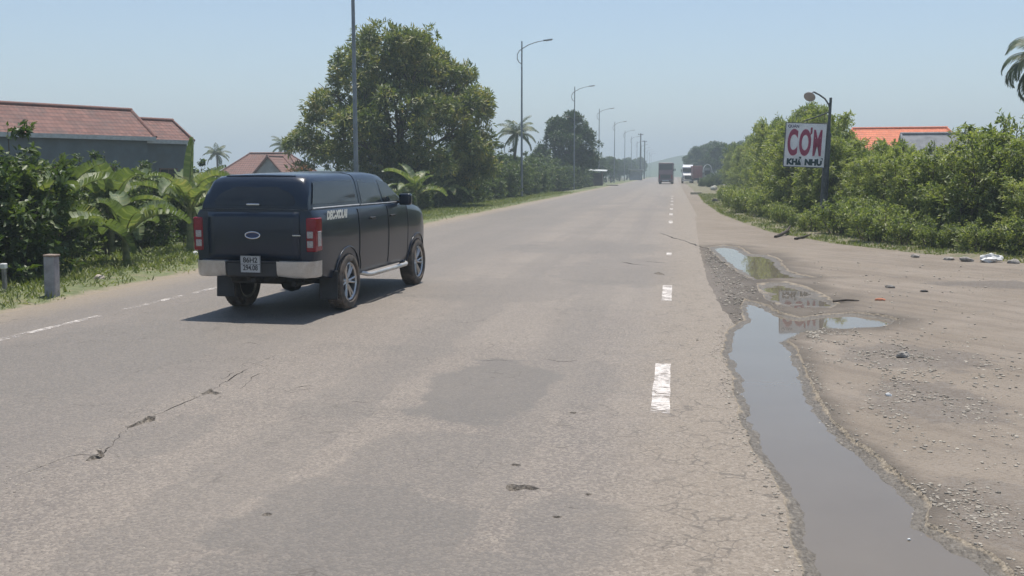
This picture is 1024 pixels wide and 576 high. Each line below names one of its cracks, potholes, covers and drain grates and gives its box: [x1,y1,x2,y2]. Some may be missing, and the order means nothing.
pothole [720,298,1017,576]
pothole [707,245,814,280]
pothole [756,281,841,308]
crack [34,342,270,470]
